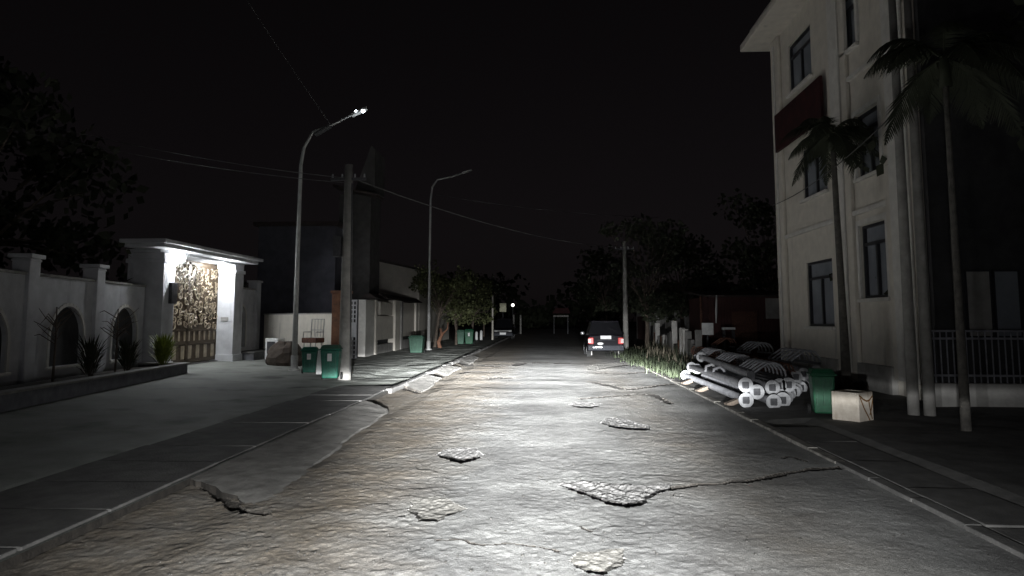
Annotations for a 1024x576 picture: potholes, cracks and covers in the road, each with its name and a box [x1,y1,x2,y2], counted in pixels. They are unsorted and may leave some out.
pothole [569,548,627,575]
crack [580,372,675,404]
crack [668,456,843,491]
pothole [557,481,674,508]
pothole [436,447,485,464]
pothole [407,496,467,522]
pothole [601,418,653,431]
